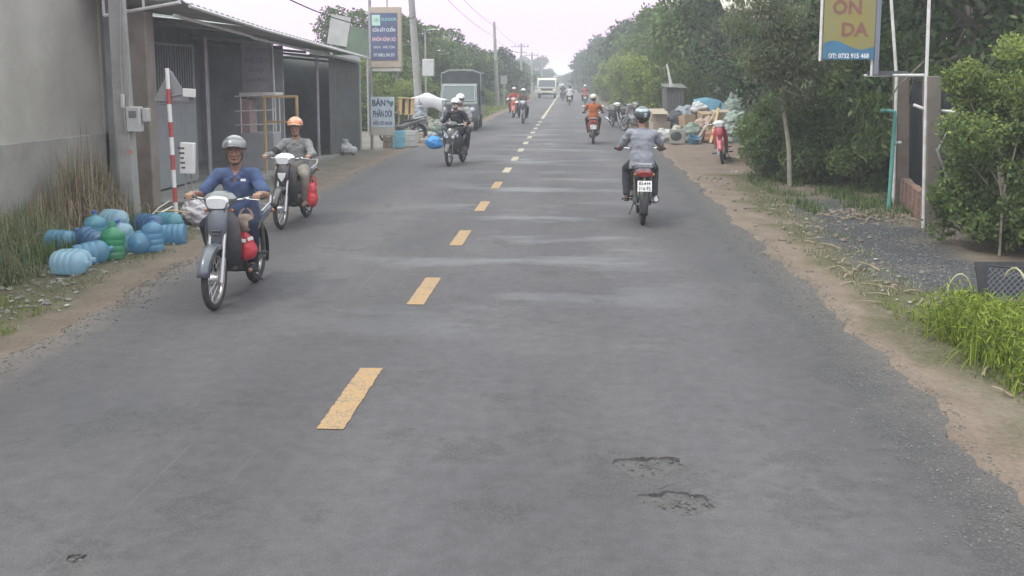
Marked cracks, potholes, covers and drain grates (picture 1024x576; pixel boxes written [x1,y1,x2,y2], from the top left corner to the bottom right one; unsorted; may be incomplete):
pothole [612,456,684,479]
pothole [66,554,87,563]
pothole [637,490,715,516]
